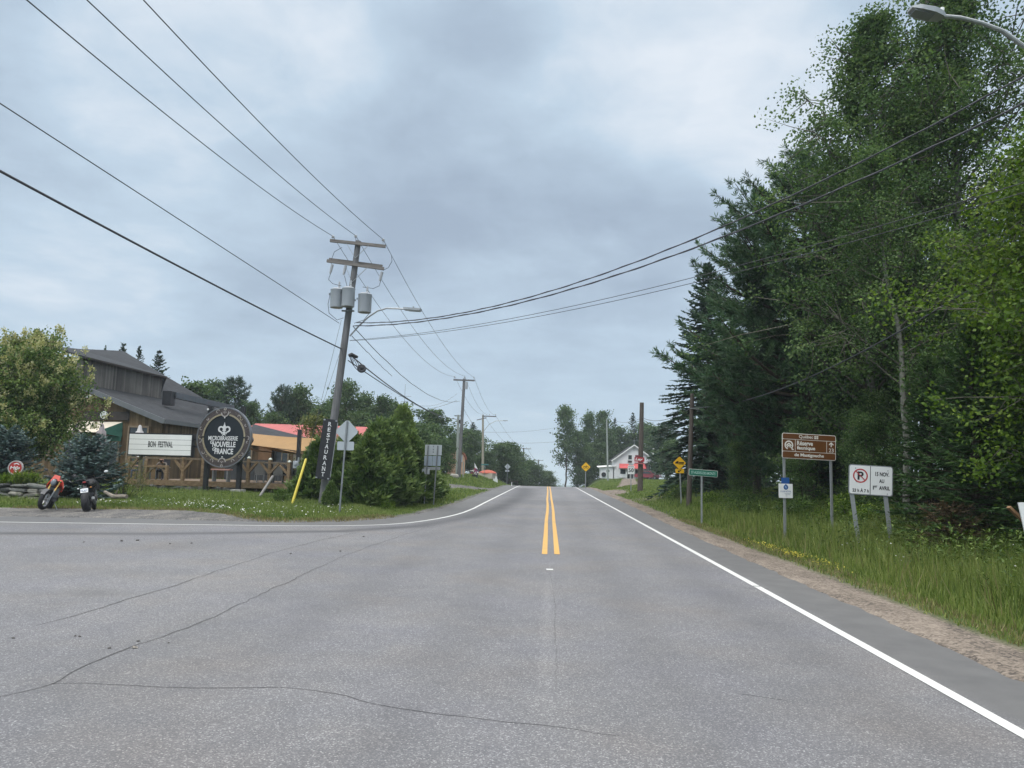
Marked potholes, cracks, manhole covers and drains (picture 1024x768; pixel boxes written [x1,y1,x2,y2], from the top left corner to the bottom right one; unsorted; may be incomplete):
crack [0,526,608,735]
